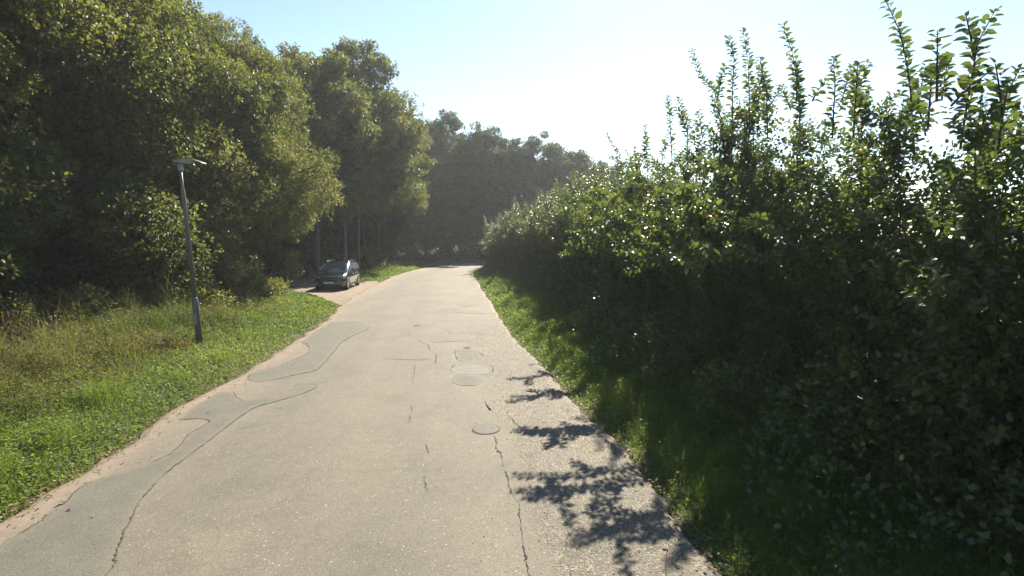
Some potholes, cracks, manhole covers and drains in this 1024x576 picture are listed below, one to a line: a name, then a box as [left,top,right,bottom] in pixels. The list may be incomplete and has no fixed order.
manhole cover [472,424,500,435]
crack [495,411,531,576]
crack [105,326,370,576]
